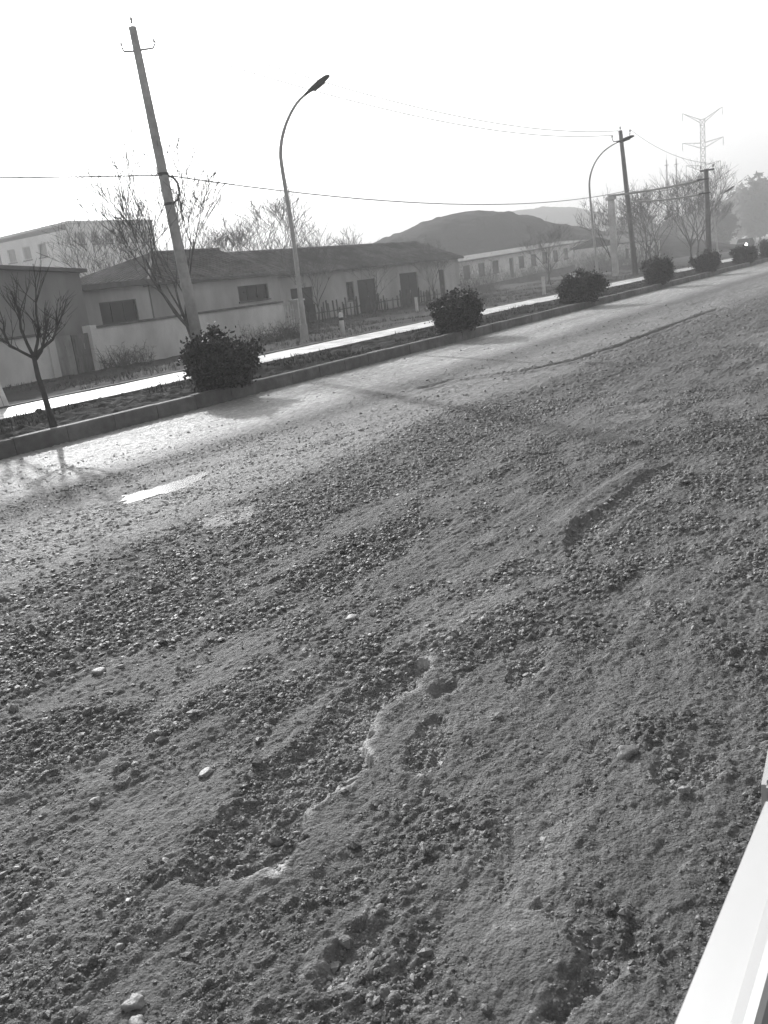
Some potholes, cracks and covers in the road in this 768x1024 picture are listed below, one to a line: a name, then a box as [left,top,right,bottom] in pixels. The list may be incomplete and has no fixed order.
pothole [563,463,692,558]
pothole [172,654,432,890]
pothole [399,713,454,776]
